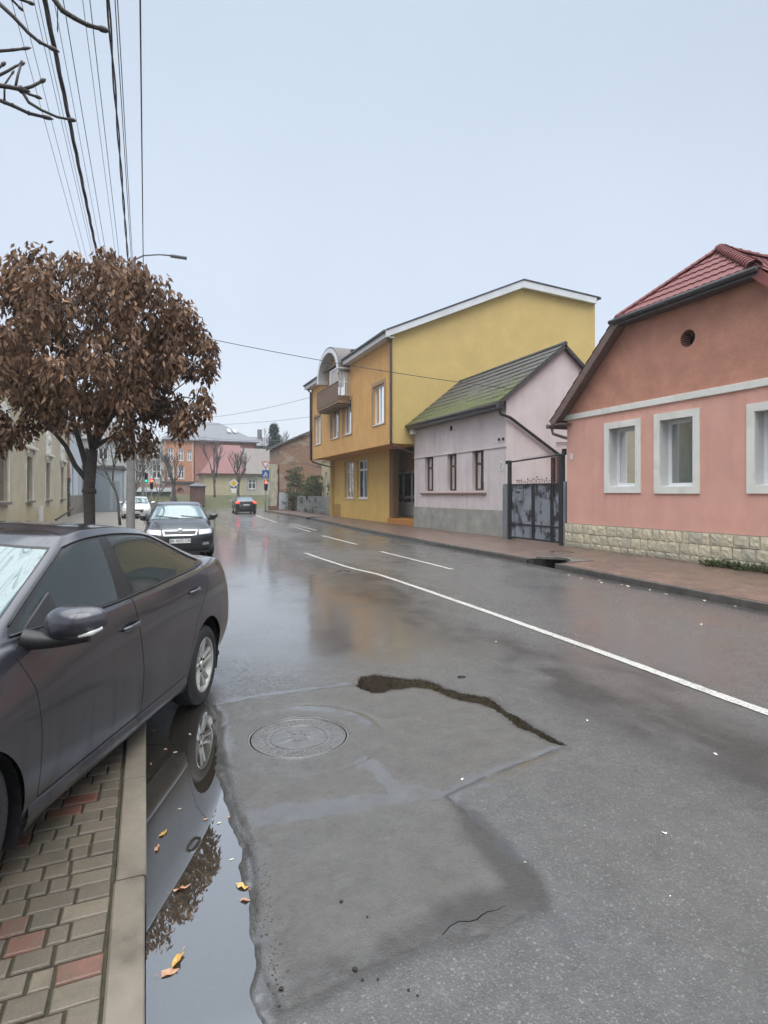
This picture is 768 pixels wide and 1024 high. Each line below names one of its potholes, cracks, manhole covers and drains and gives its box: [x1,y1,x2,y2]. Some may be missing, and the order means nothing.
crack [442,905,506,935]
drain grate [526,556,594,569]
pothole [356,674,567,746]
manhole cover [247,717,349,759]
